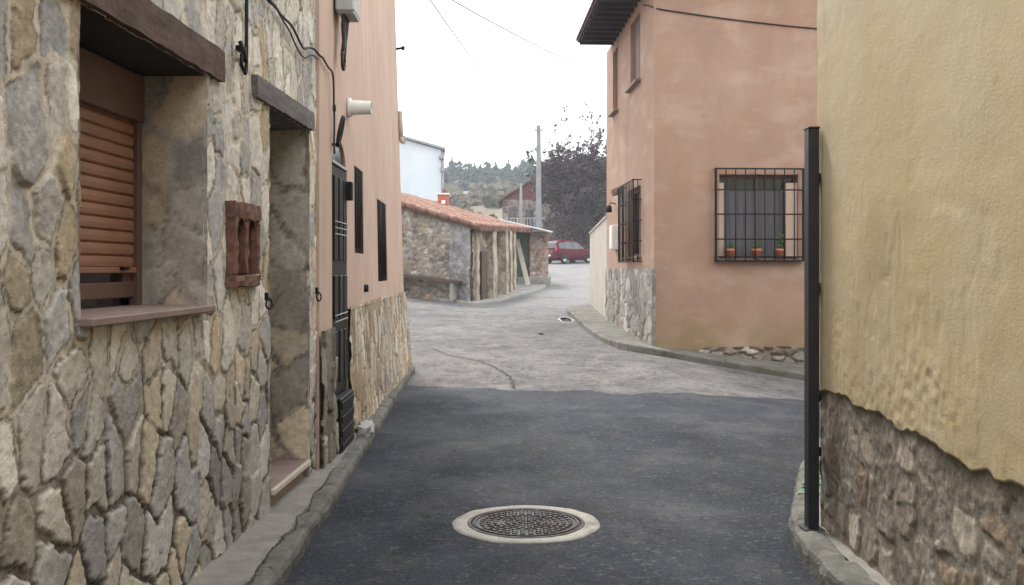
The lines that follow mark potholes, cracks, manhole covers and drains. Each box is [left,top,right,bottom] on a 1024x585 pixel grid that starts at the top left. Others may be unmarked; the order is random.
manhole cover [452,505,600,544]
crack [435,349,516,388]
